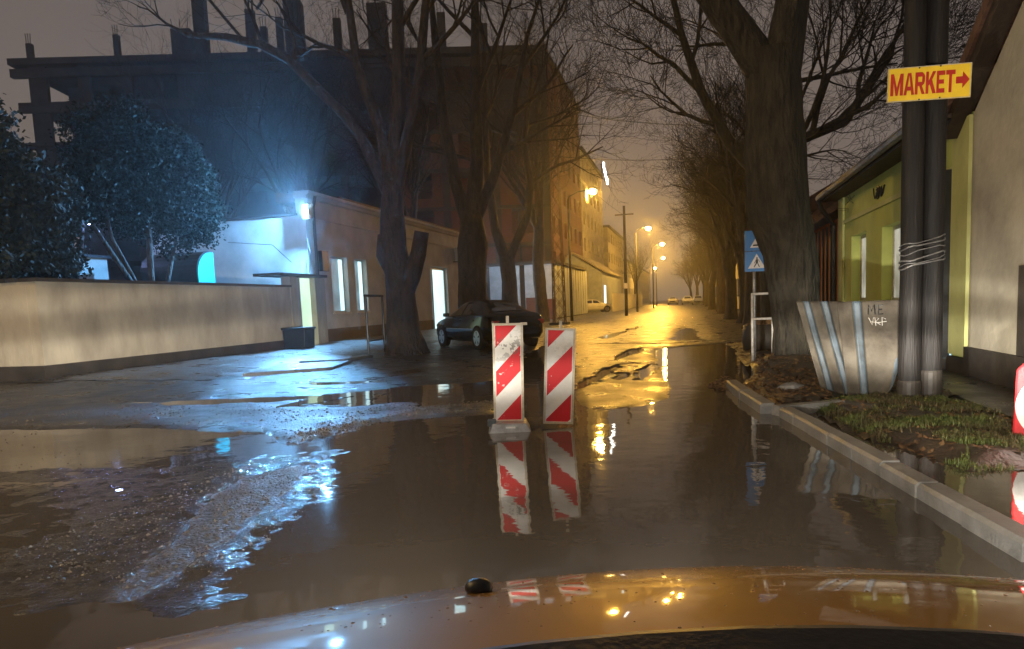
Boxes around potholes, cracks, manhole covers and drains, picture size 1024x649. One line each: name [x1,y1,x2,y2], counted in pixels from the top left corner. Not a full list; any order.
pothole [574,364,626,391]
pothole [631,363,665,381]
